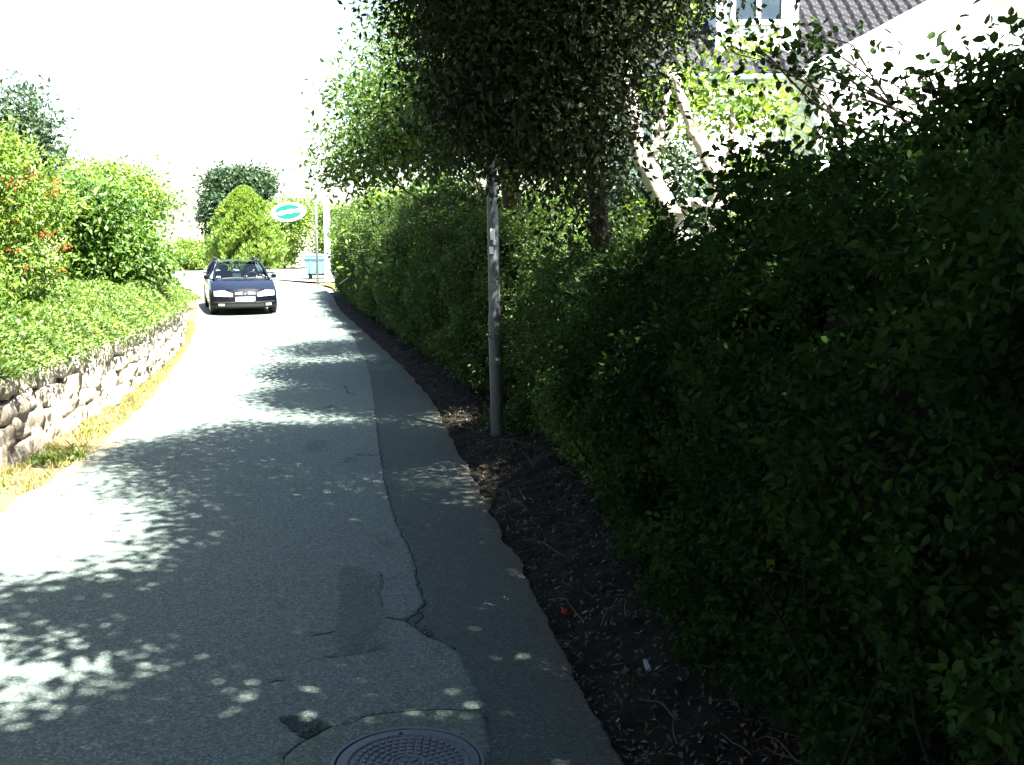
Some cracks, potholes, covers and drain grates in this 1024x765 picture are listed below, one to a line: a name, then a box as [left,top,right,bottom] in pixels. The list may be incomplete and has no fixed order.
manhole cover [329,727,486,765]
crack [358,411,457,649]
